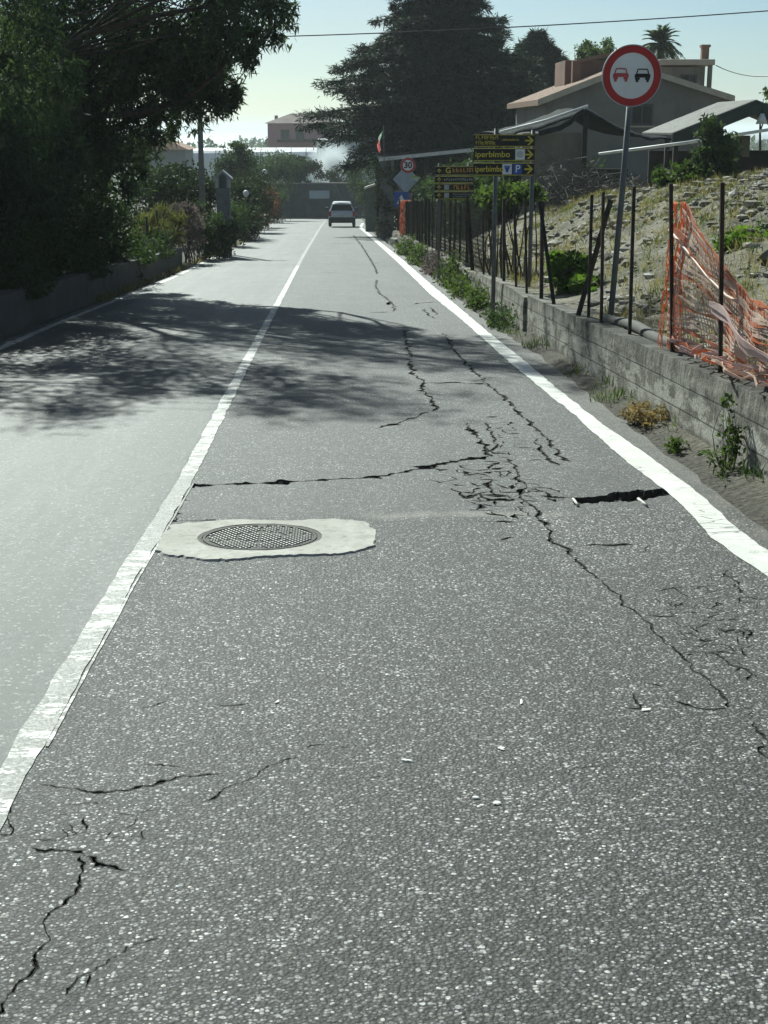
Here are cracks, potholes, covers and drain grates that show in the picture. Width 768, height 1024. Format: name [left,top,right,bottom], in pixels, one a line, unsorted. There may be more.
crack [41,743,344,802]
crack [168,302,761,718]
crack [0,804,151,1017]
pothole [572,489,670,507]
manhole cover [154,518,377,562]
